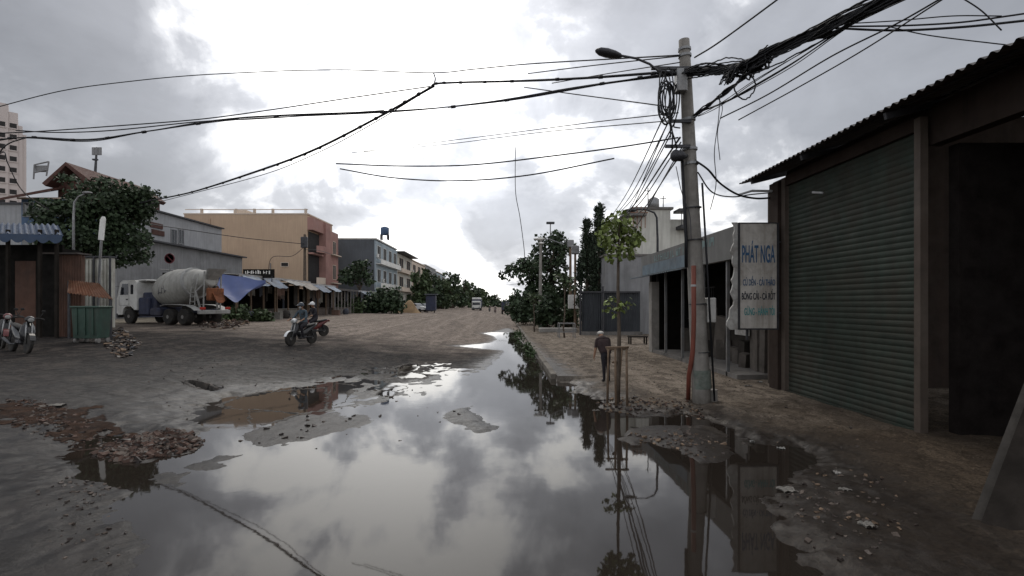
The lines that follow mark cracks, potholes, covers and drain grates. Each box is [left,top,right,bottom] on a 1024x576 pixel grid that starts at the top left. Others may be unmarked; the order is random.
pothole [384,371,433,379]
pothole [214,387,330,415]
pothole [246,411,299,426]
pothole [181,380,222,391]
